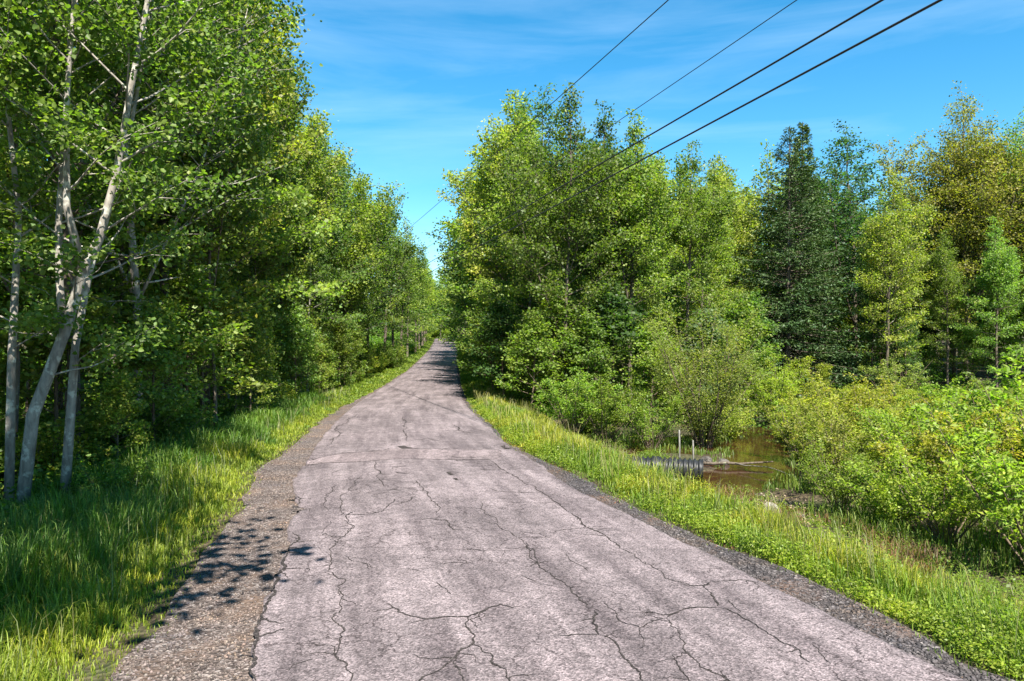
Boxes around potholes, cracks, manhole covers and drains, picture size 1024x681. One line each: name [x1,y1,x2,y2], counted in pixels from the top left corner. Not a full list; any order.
crack [236,417,830,681]
